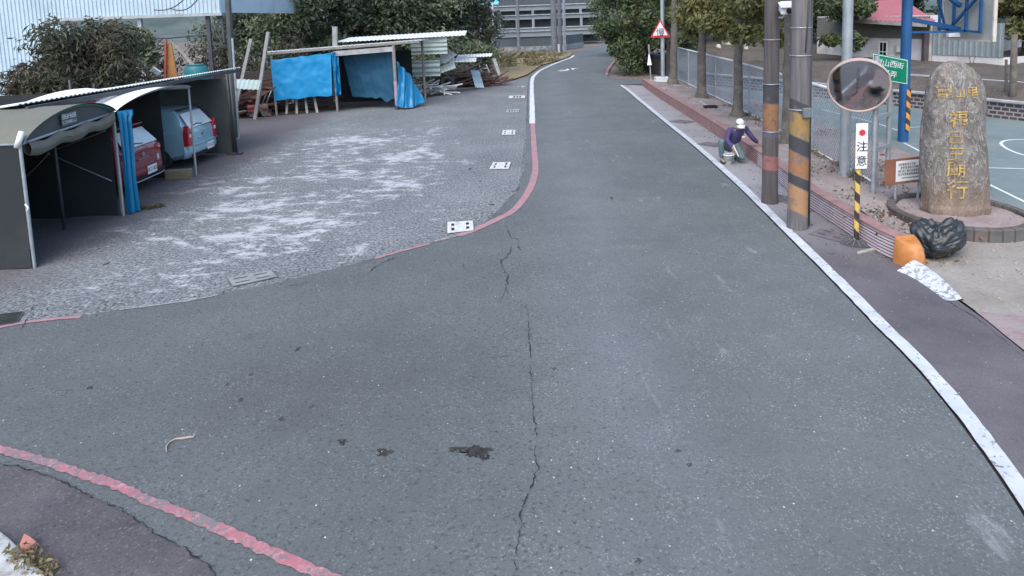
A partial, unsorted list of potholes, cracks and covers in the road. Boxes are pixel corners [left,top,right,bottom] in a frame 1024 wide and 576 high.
crack [462,213,539,576]
